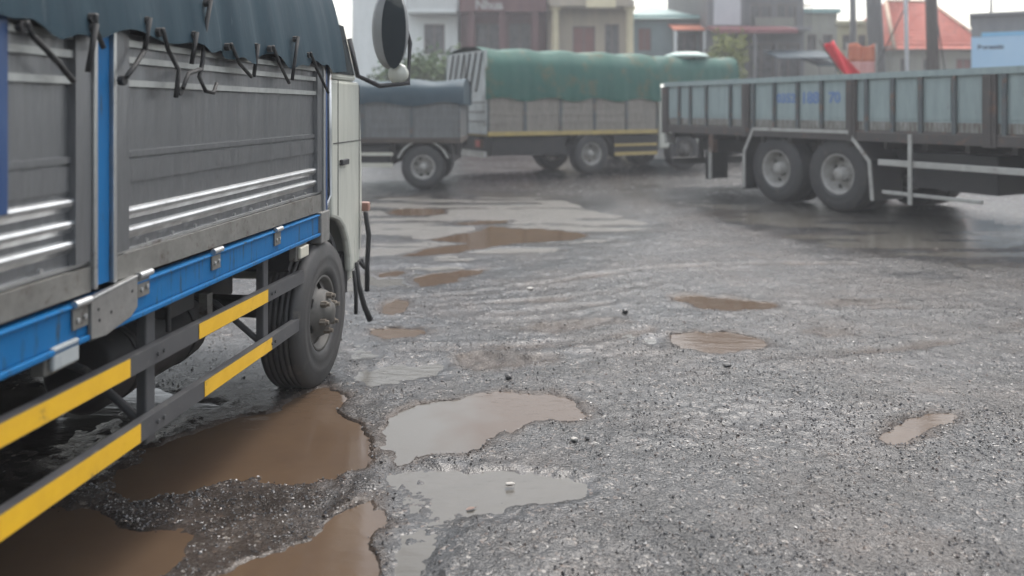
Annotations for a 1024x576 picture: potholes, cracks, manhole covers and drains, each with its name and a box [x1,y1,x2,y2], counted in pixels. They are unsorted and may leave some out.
pothole [79,386,382,507]
pothole [410,268,491,286]
pothole [668,329,771,354]
pothole [376,388,591,467]
pothole [402,226,588,256]
pothole [370,326,430,339]
pothole [379,299,410,315]
pothole [453,349,559,371]
pothole [668,292,780,311]
pothole [201,492,393,576]
pothole [874,410,963,447]
